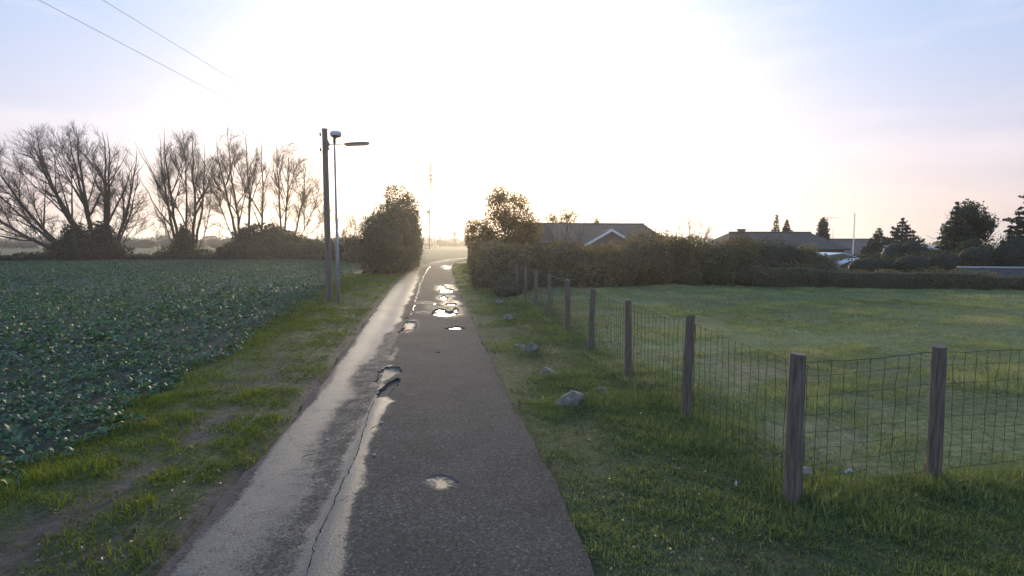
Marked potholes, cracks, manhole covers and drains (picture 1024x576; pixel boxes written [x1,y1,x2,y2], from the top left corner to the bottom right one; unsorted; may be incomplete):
pothole [399,321,418,333]
pothole [424,474,459,491]
pothole [432,308,459,317]
crack [306,402,376,575]
pothole [377,377,401,398]
pothole [373,366,403,384]
